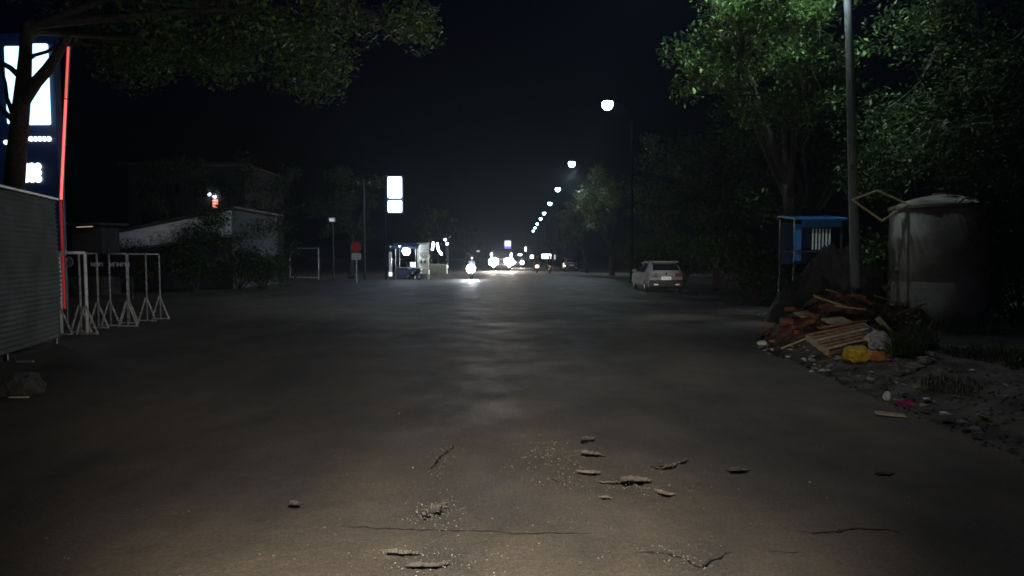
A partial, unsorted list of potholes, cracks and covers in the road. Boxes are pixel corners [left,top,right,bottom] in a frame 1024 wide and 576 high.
crack [335,526,592,534]
crack [428,445,454,470]
crack [634,551,731,569]
